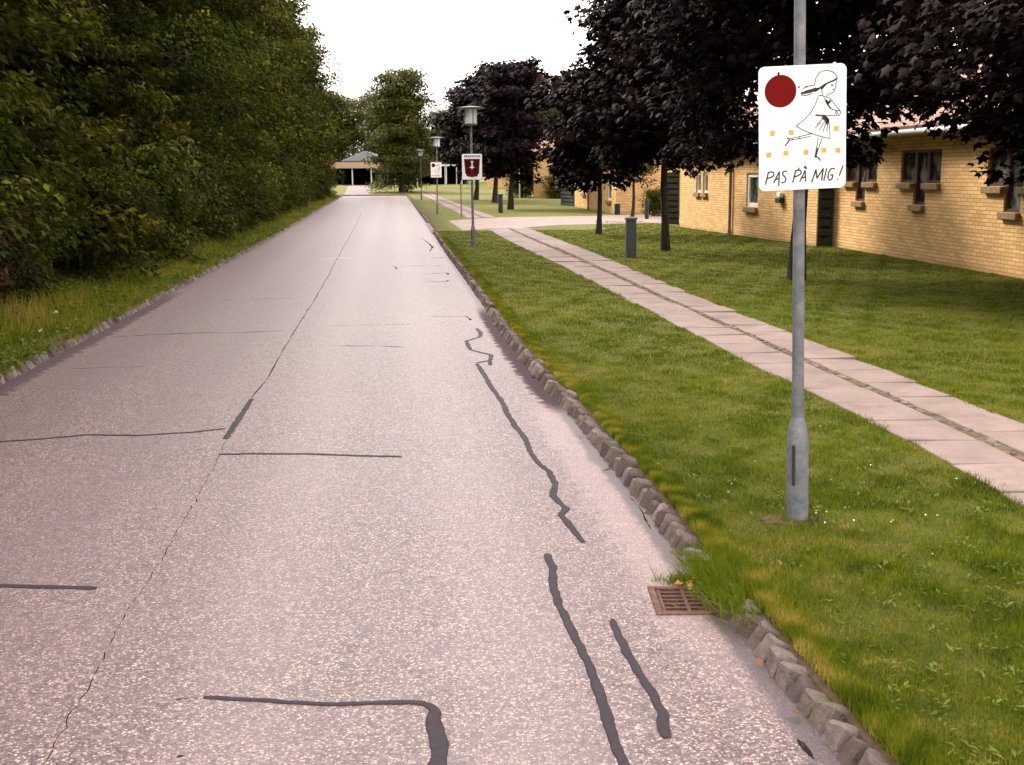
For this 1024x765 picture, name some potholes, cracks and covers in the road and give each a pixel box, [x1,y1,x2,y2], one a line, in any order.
drain grate [647,586,718,615]
